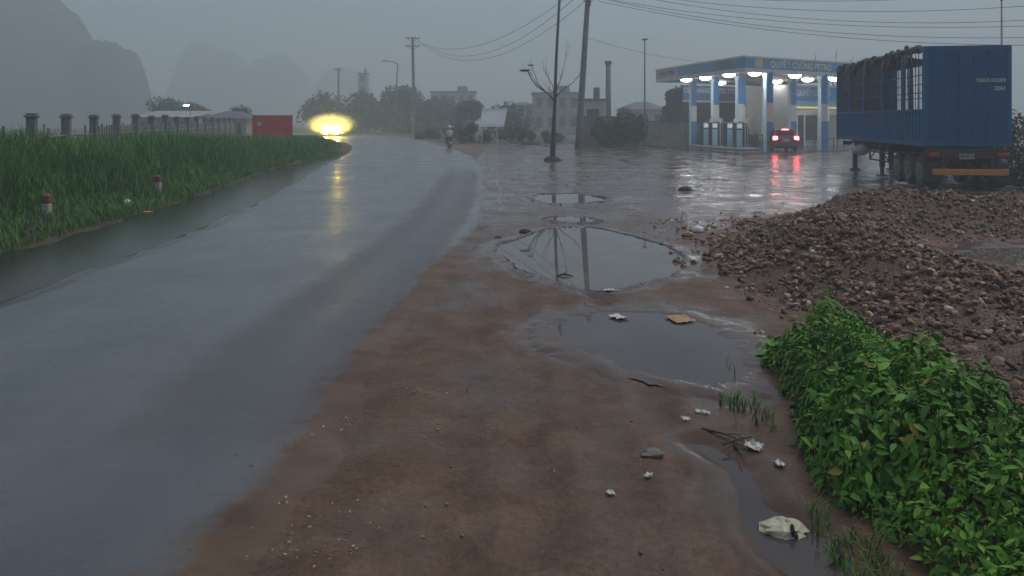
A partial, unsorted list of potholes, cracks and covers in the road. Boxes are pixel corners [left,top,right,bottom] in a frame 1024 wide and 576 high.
pothole [523,305,798,407]
pothole [522,192,615,205]
pothole [541,215,607,225]
pothole [483,226,700,300]
